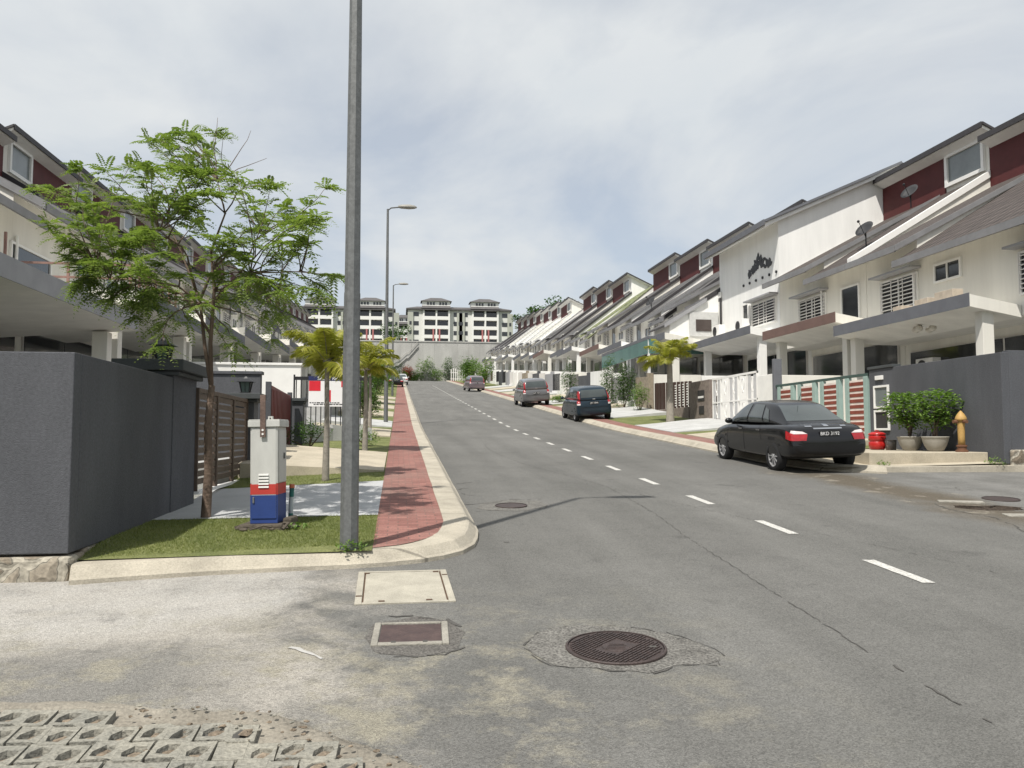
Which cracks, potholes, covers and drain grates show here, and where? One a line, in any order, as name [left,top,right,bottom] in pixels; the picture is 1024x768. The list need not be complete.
manhole cover [565,631,667,666]
utility cover [370,621,449,647]
utility cover [354,569,456,605]
